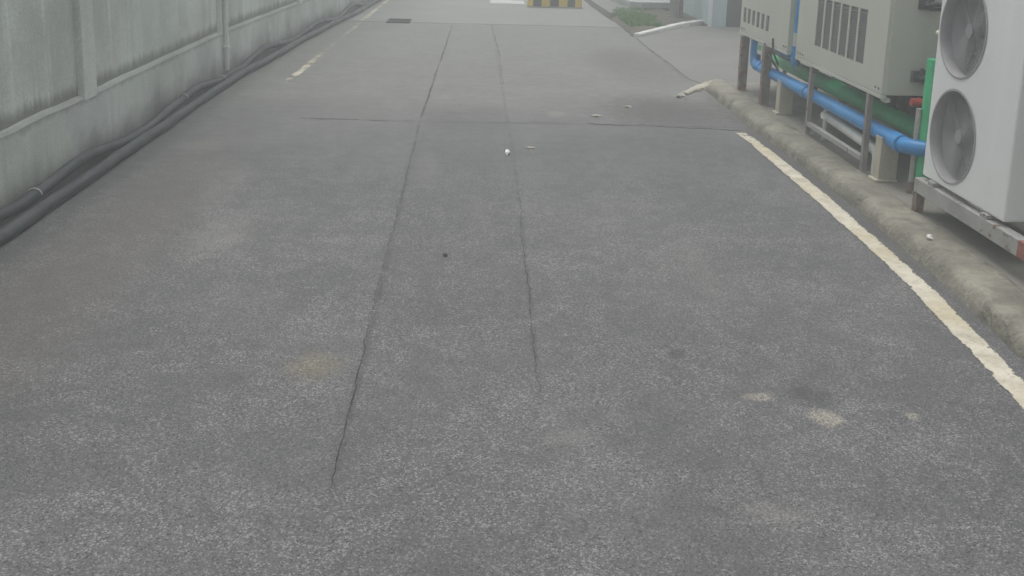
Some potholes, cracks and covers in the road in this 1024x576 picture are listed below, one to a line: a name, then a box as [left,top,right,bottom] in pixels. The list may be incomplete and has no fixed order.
crack [491,25,541,392]
crack [332,25,453,484]
